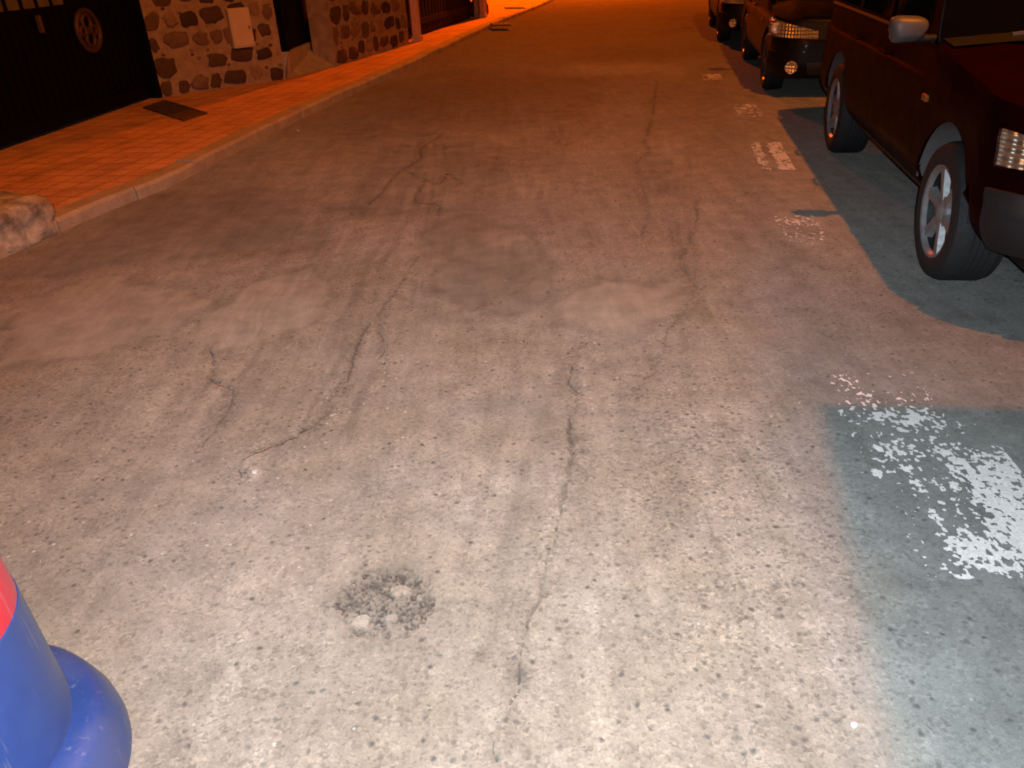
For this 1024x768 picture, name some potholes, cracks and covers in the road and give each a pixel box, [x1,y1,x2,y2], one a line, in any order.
pothole [322,561,447,653]
crack [624,81,703,397]
crack [364,131,467,216]
crack [485,331,597,768]
drain grate [143,100,208,121]
crack [194,258,419,485]
